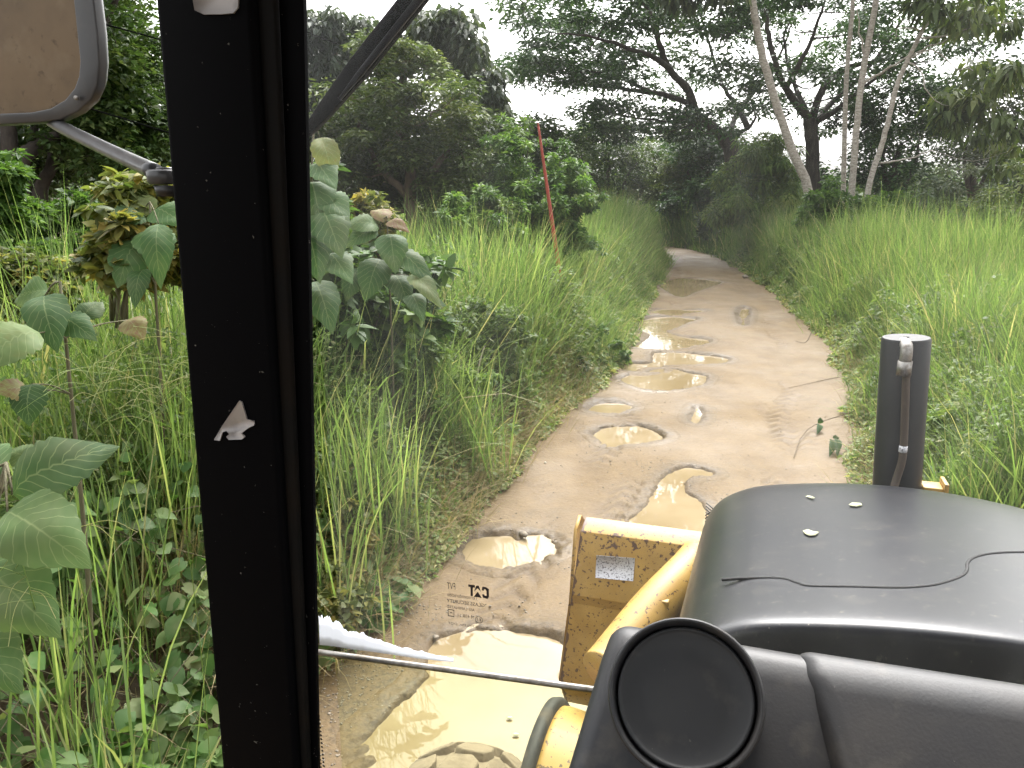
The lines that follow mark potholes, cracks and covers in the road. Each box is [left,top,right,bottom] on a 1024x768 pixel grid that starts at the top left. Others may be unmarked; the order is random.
pothole [609,367,719,393]
pothole [615,349,740,376]
pothole [656,277,727,298]
pothole [577,420,681,450]
pothole [676,402,717,427]
pothole [631,314,720,351]
pothole [611,460,730,532]
pothole [574,396,644,417]
pothole [729,305,759,327]
pothole [436,522,573,579]
pothole [336,616,588,768]
